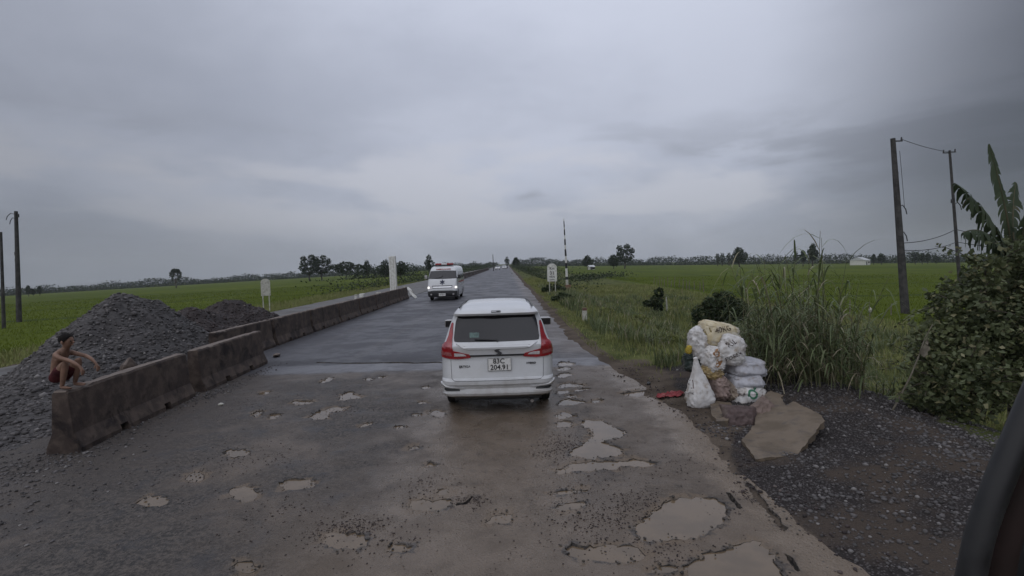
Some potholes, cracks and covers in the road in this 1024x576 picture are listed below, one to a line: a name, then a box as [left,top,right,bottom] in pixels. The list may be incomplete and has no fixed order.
pothole [555,457,659,474]
pothole [556,398,586,406]
pothole [317,530,376,554]
pothole [132,494,179,508]
pothole [308,406,347,420]
pothole [559,539,649,564]
pothole [628,494,729,543]
pothole [278,475,316,491]
pothole [680,538,791,576]
pothole [218,484,263,502]
pothole [223,447,254,458]
pothole [567,419,630,460]
